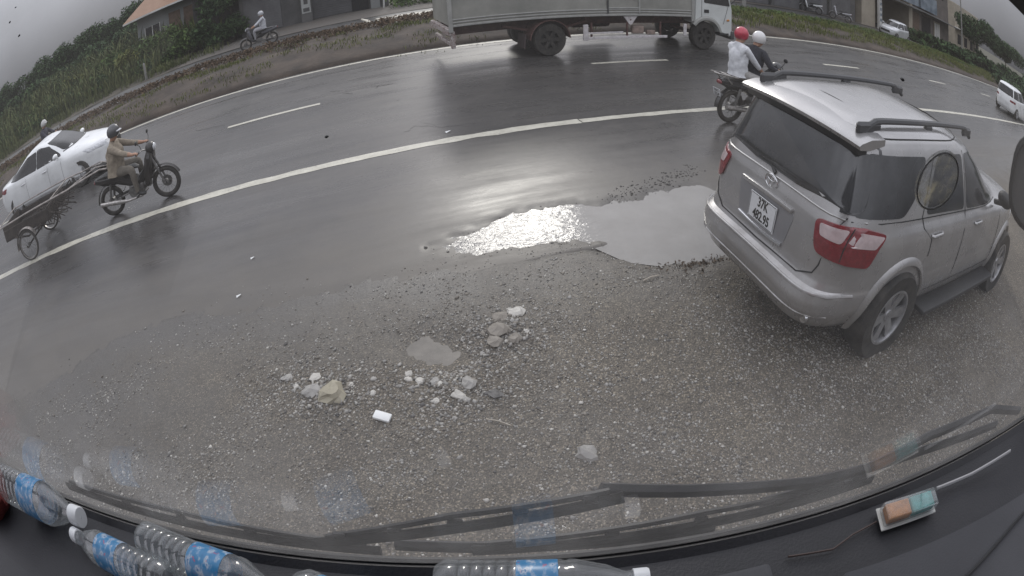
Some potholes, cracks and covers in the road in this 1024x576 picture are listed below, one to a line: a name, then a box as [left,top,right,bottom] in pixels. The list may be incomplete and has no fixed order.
pothole [424,164,728,266]
